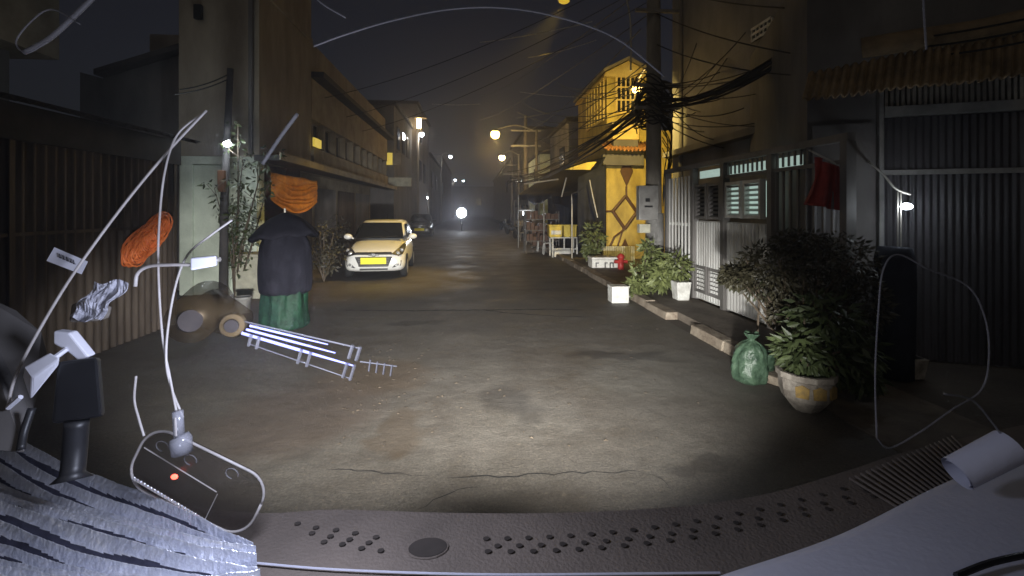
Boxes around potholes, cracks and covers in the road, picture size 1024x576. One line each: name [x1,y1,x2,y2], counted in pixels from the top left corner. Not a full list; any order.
crack [420,470,668,509]
